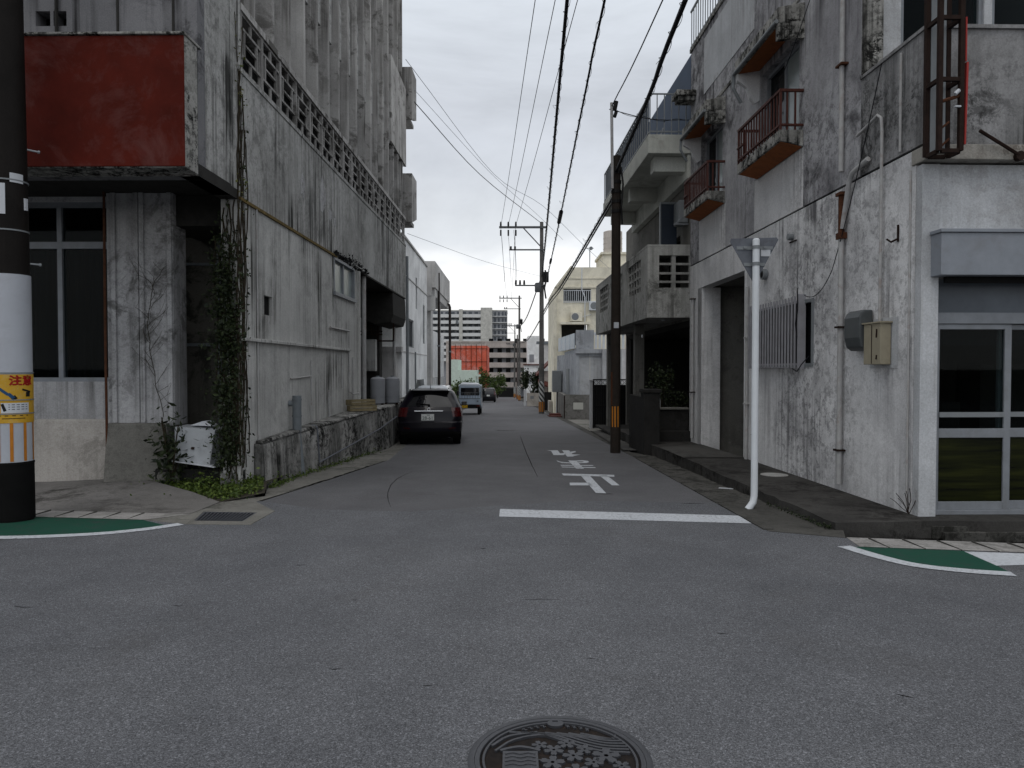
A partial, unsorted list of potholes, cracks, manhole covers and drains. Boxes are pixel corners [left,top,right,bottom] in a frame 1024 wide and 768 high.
drain grate [187,509,275,525]
manhole cover [468,716,653,768]
